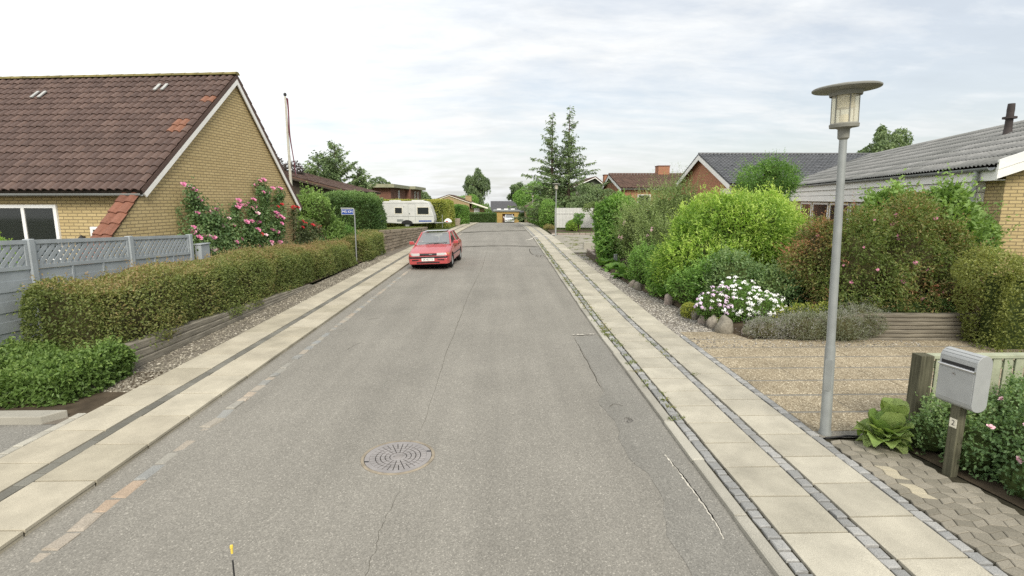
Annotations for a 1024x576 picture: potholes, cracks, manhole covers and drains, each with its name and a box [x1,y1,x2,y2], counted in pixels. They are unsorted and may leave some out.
manhole cover [361,440,435,475]
crack [665,455,724,539]
crack [572,334,618,406]
